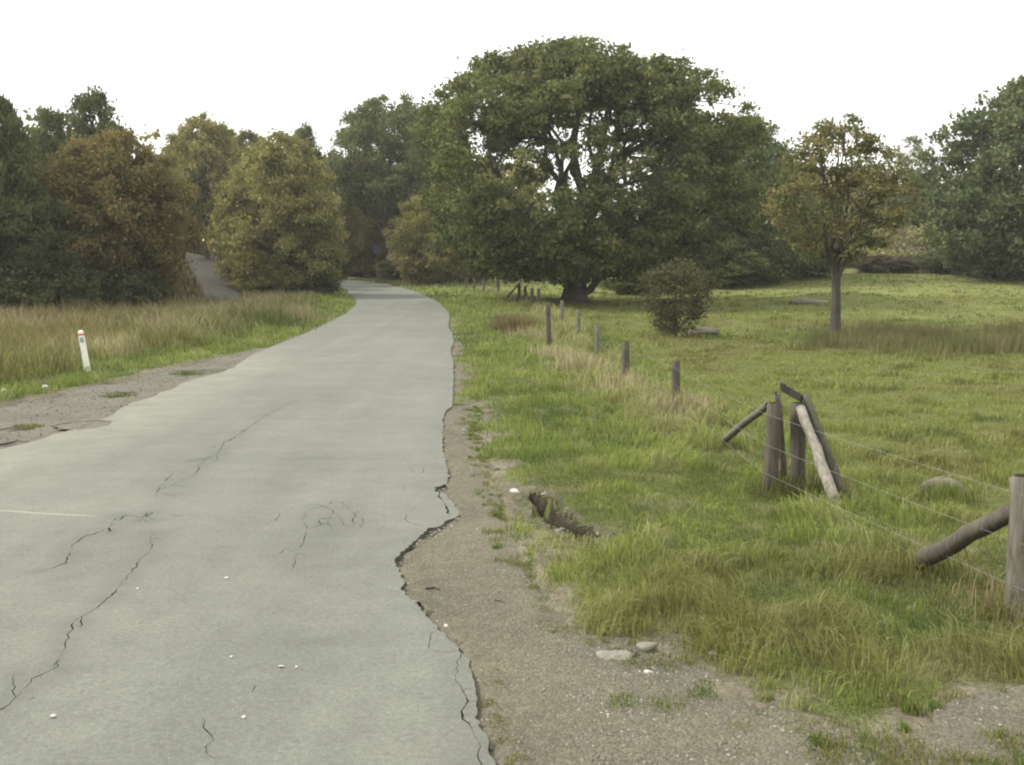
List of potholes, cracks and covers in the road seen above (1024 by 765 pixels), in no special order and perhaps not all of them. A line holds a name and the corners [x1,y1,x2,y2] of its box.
crack [0,513,153,710]
crack [430,630,486,765]
